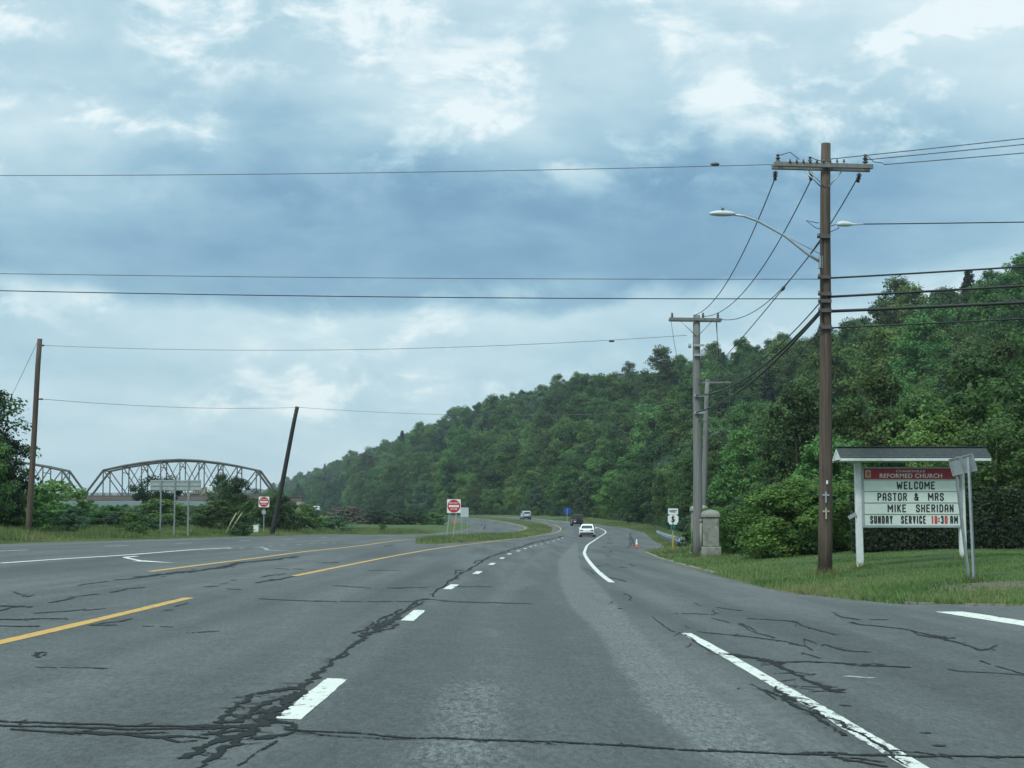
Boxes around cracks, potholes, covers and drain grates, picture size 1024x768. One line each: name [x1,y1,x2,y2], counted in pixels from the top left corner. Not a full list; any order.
crack [737,679,814,699]
crack [203,562,532,604]
crack [652,603,996,658]
